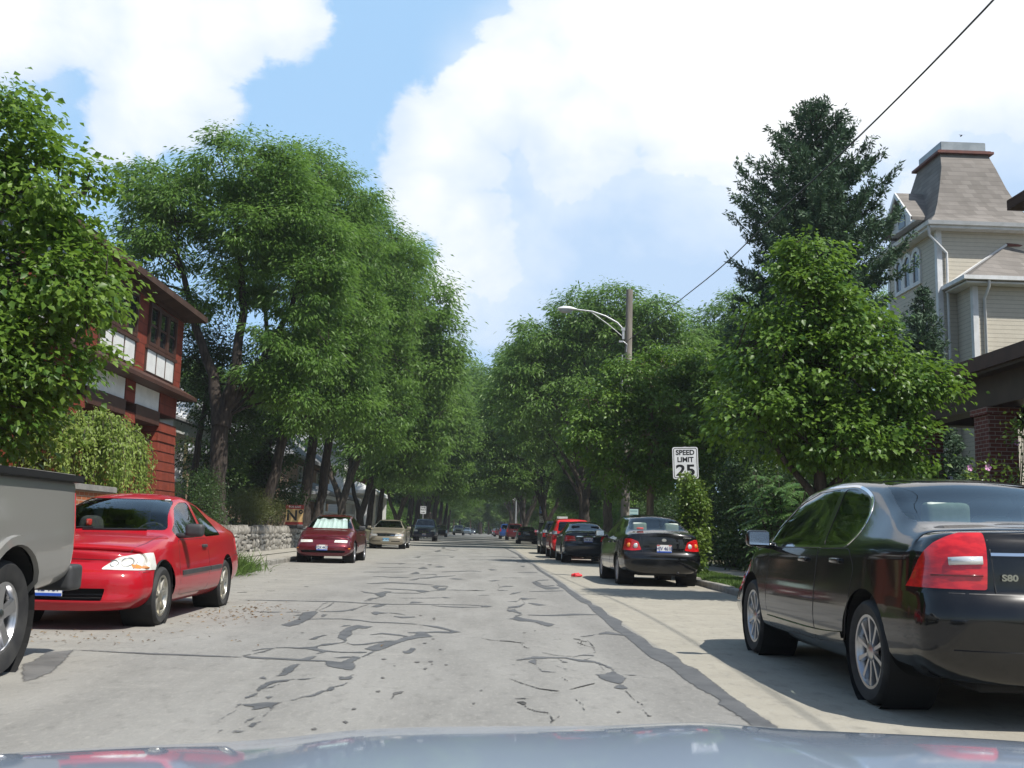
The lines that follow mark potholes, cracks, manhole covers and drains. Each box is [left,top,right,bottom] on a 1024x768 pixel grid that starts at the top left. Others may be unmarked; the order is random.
crack [512,677,594,722]
